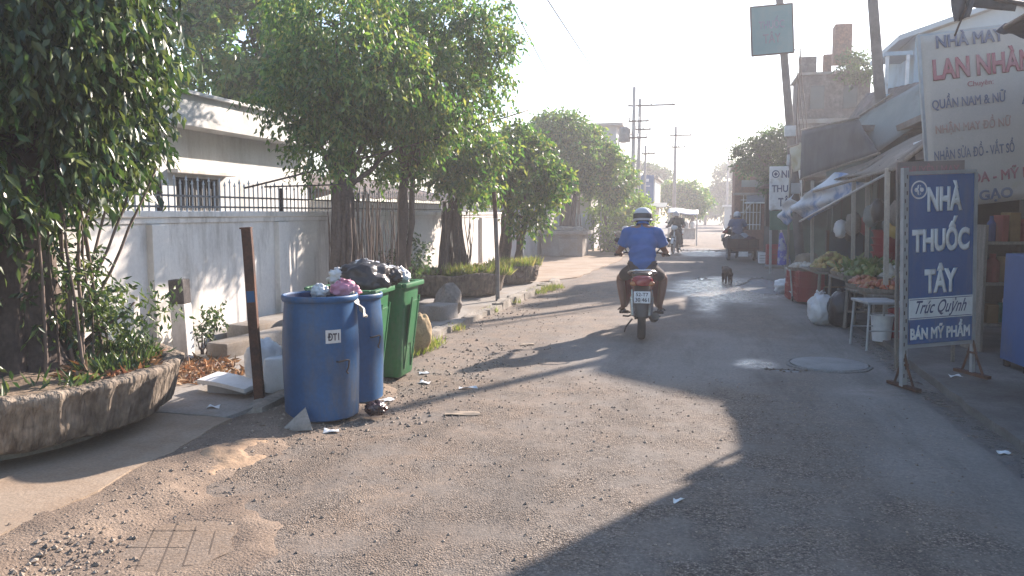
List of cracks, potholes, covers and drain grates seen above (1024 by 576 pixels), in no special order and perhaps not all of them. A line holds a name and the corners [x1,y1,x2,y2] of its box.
manhole cover [786,357,874,373]
